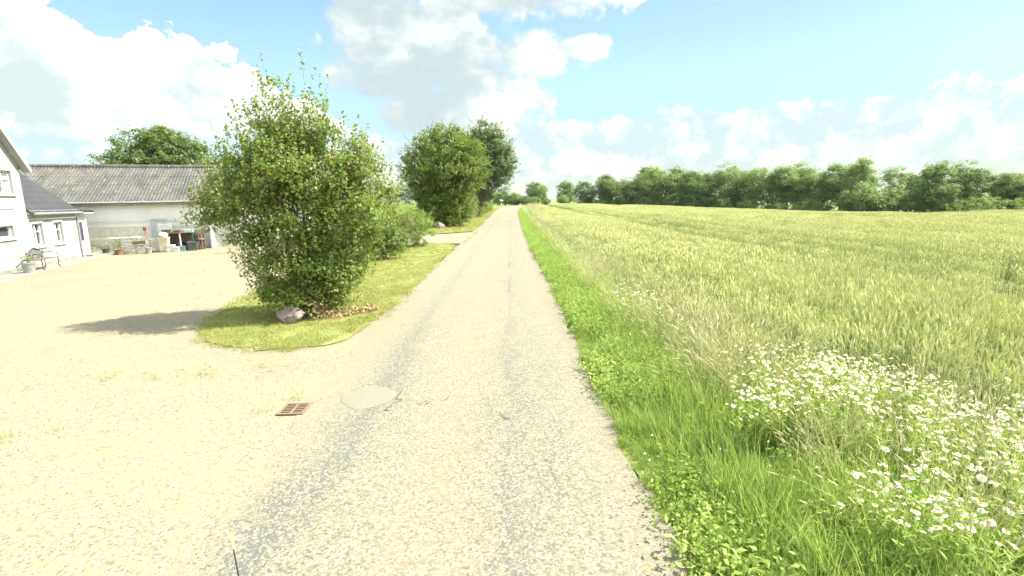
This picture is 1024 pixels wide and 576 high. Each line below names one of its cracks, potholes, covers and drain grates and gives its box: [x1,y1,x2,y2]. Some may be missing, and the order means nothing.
drain grate [275,402,313,415]
